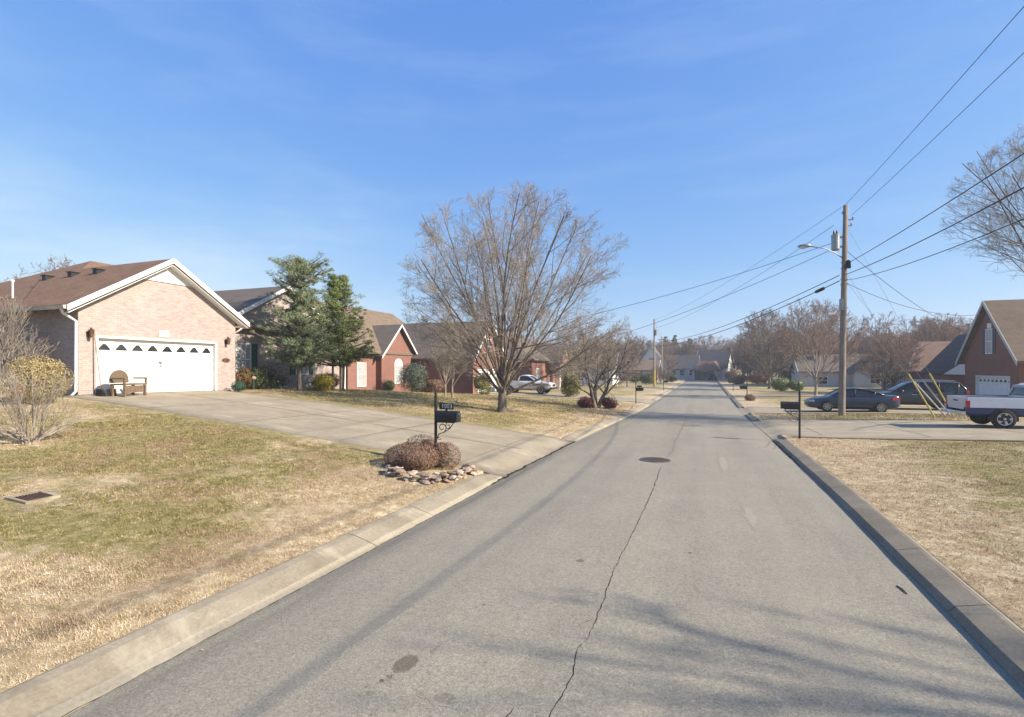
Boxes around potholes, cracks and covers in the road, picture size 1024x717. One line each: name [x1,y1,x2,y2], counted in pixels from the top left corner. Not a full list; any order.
crack [549,467,661,717]
drain grate [5,490,61,505]
